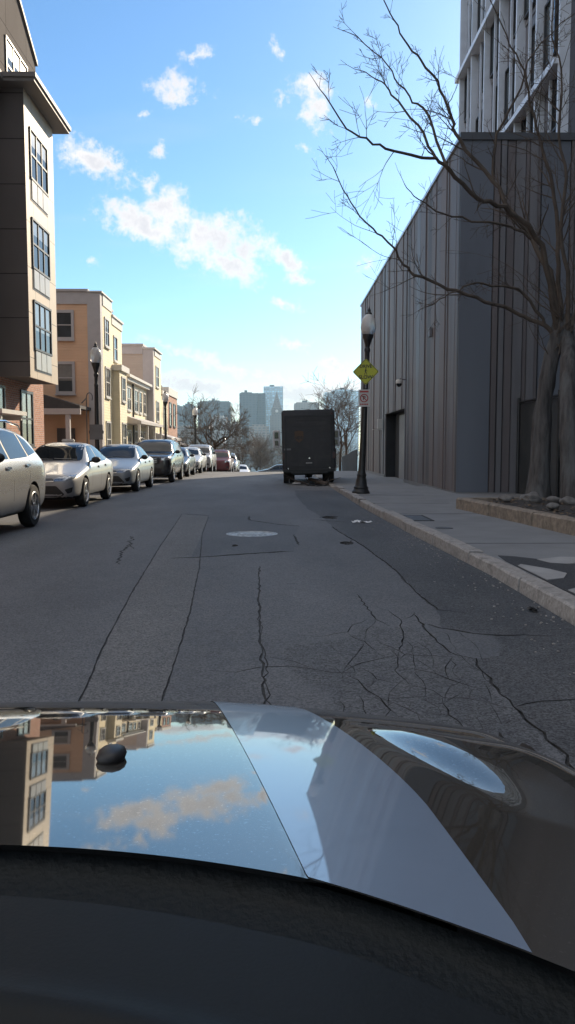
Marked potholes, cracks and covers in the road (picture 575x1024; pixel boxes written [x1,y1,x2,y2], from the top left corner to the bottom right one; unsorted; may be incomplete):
crack [185,517,575,770]
